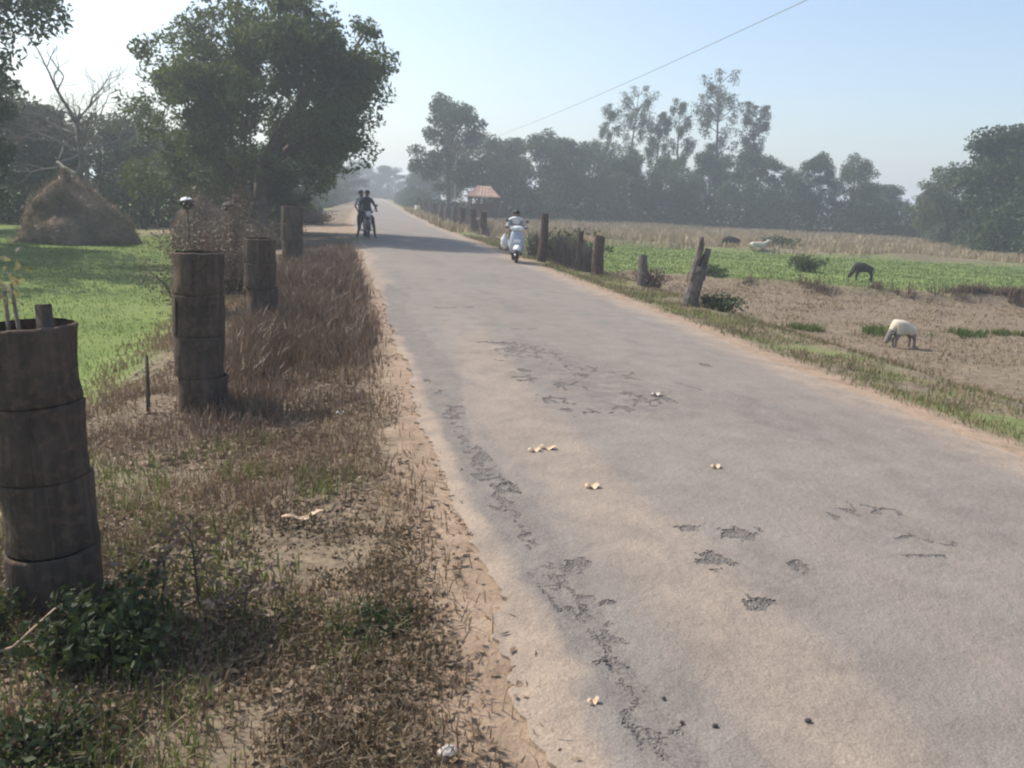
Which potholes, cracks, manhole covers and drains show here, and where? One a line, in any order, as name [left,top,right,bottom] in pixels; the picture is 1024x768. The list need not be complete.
pothole [717,526,765,542]
crack [423,379,690,761]
pothole [785,559,810,574]
pothole [693,550,739,572]
crack [826,501,958,558]
crack [477,328,704,417]
pothole [741,594,777,611]
